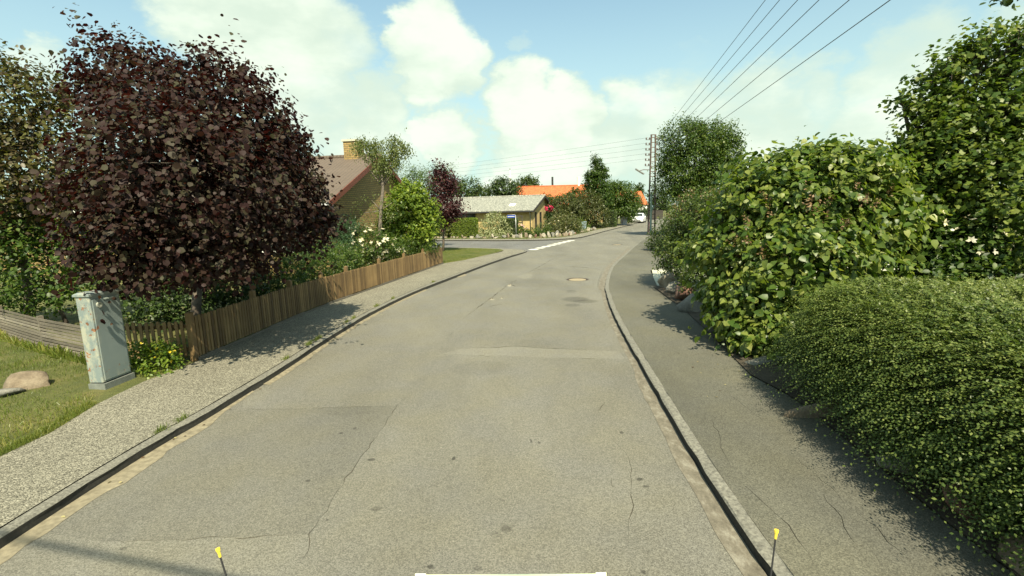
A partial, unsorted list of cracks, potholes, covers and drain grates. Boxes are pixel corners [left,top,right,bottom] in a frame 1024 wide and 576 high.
crack [803,464,914,569]
crack [611,440,634,542]
